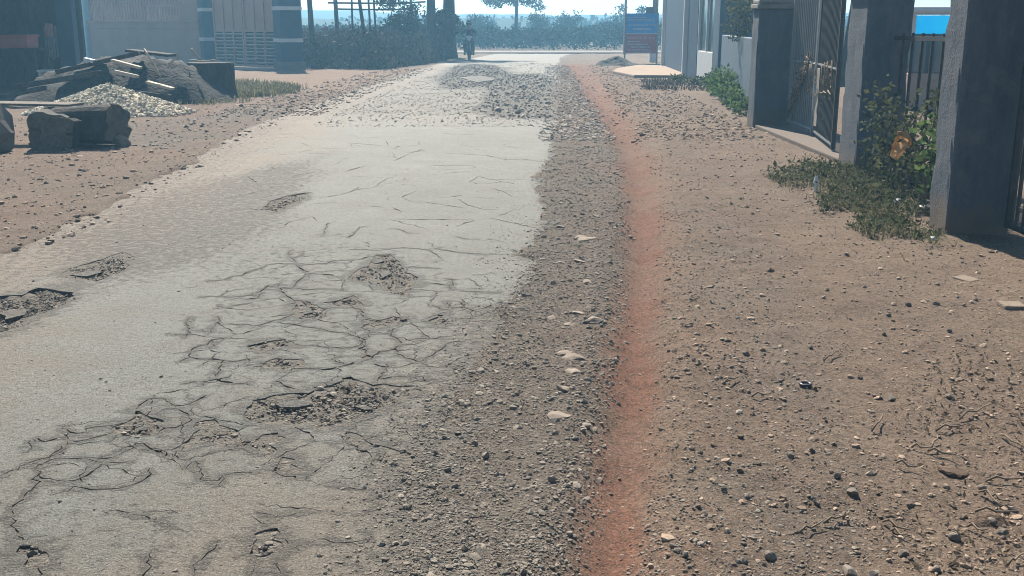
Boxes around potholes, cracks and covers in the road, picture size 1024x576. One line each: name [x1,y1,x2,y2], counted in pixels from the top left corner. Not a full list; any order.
pothole [0,288,75,334]
pothole [244,376,422,430]
pothole [61,252,135,281]
pothole [250,528,283,557]
pothole [261,192,309,213]
pothole [348,254,418,296]
crack [3,125,541,576]
